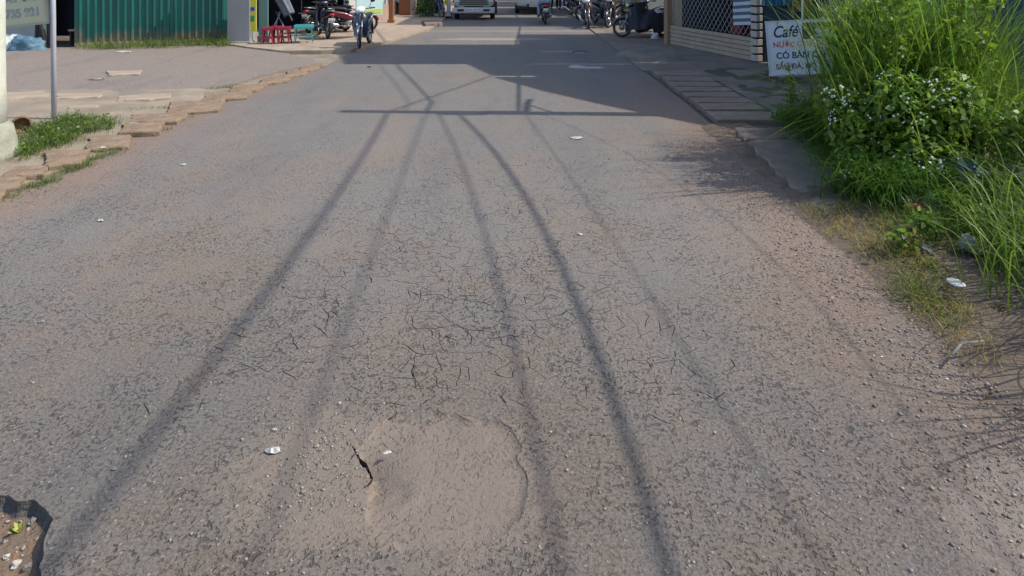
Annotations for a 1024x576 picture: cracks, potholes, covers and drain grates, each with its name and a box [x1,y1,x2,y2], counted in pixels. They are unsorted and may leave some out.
pothole [0,495,53,576]
crack [350,446,373,489]
